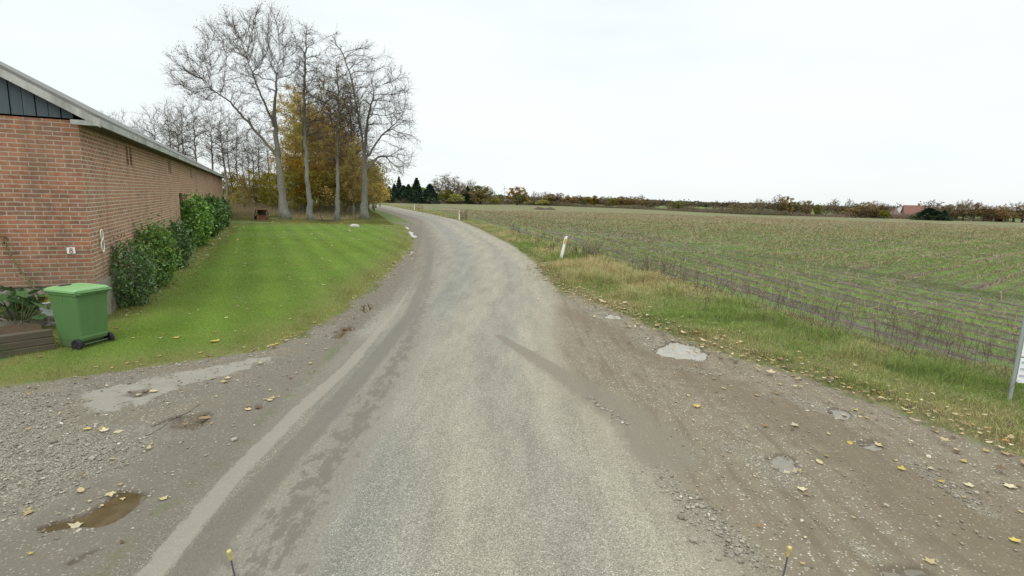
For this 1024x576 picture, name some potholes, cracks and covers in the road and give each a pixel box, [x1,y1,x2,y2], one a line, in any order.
pothole [822,428,933,468]
pothole [633,337,729,369]
